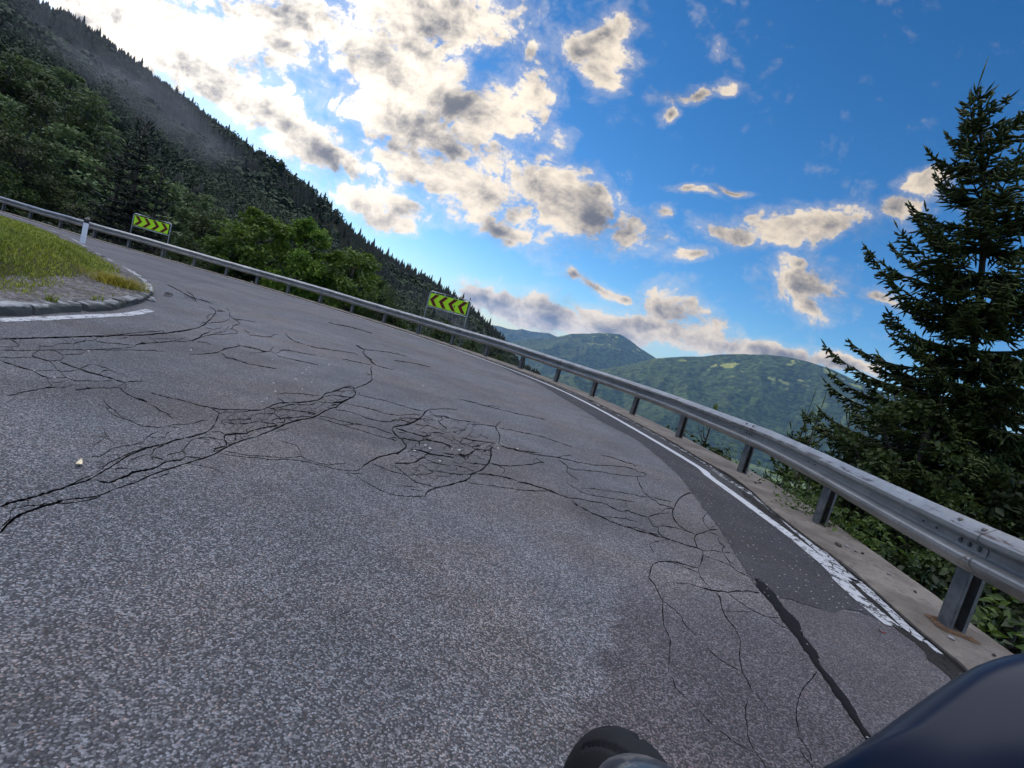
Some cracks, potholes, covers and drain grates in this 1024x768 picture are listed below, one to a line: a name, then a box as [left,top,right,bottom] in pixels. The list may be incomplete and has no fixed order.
crack [0,284,571,533]
crack [502,446,787,768]
crack [796,671,817,768]
